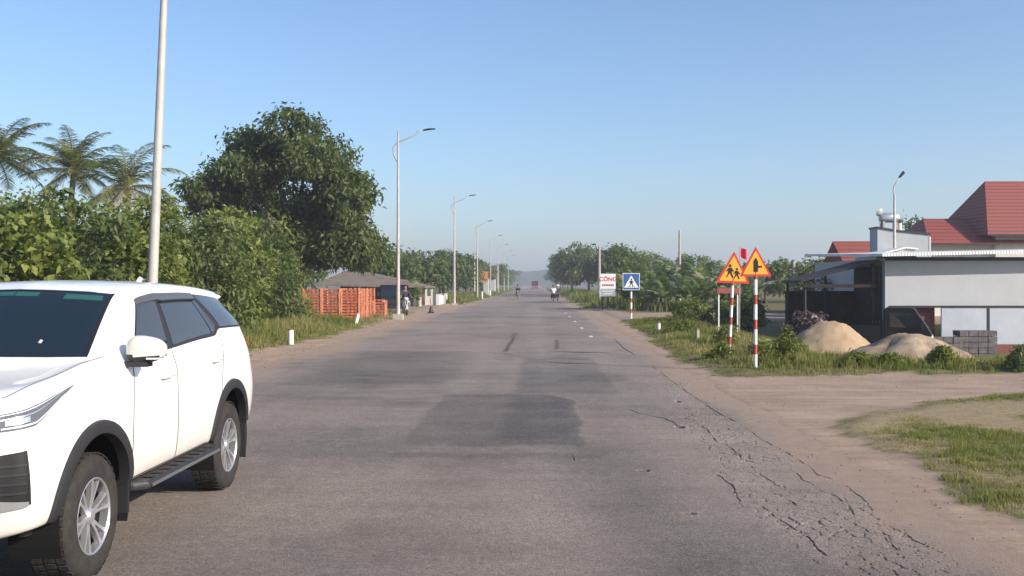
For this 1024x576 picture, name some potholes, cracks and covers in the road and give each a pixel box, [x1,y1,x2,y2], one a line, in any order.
crack [624,366,976,576]
